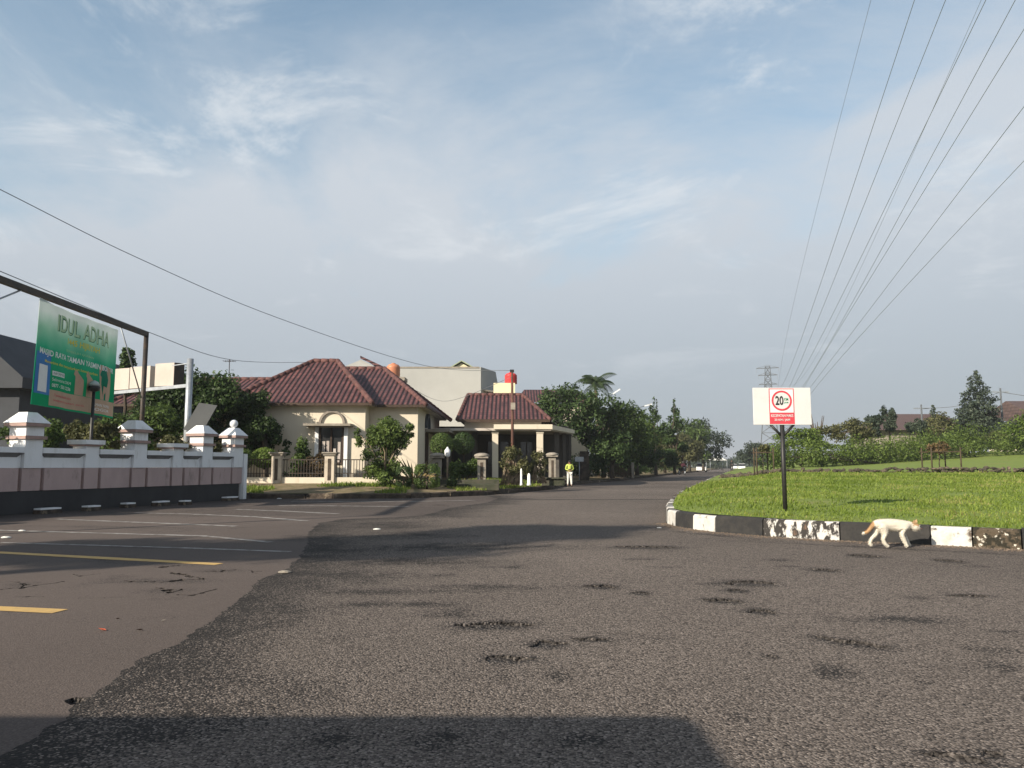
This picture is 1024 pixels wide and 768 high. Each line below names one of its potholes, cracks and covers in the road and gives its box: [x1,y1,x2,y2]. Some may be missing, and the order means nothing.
pothole [454,621,535,630]
pothole [815,636,892,648]
crack [110,565,262,598]
pothole [484,655,535,664]
pothole [530,640,570,649]
crack [0,574,92,597]
